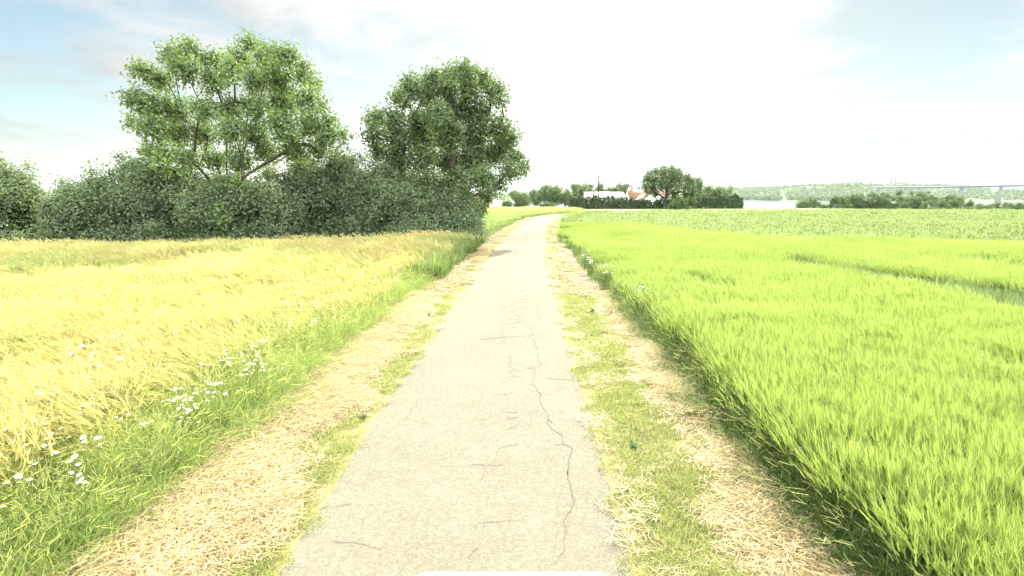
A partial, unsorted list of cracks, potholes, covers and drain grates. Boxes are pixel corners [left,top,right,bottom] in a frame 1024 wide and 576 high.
crack [471,326,575,565]
